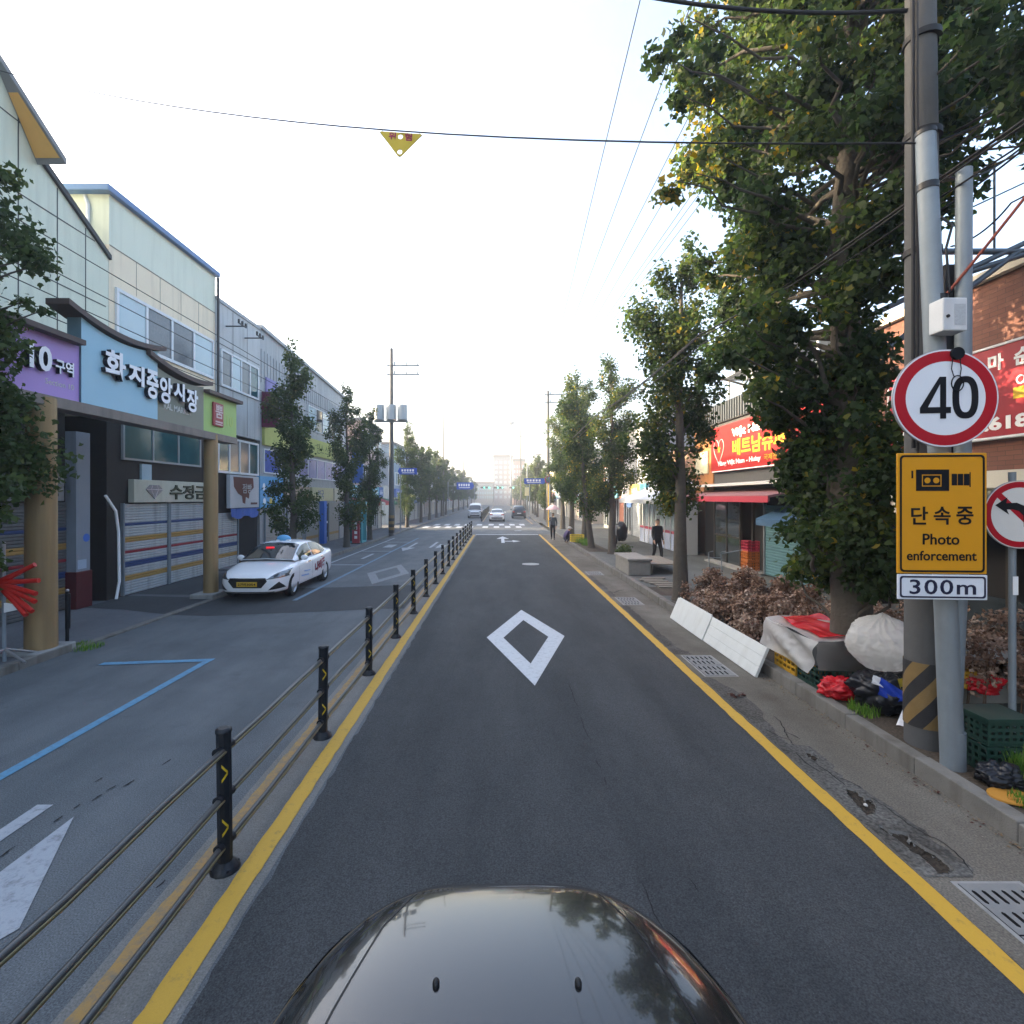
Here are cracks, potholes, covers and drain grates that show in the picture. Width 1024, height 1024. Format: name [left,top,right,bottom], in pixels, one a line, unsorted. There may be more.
drain grate [681,655,739,677]
crack [766,717,860,787]
pothole [845,787,876,816]
drain grate [615,597,644,605]
pothole [878,823,954,874]
crack [638,876,663,927]
drain grate [950,881,1024,944]
